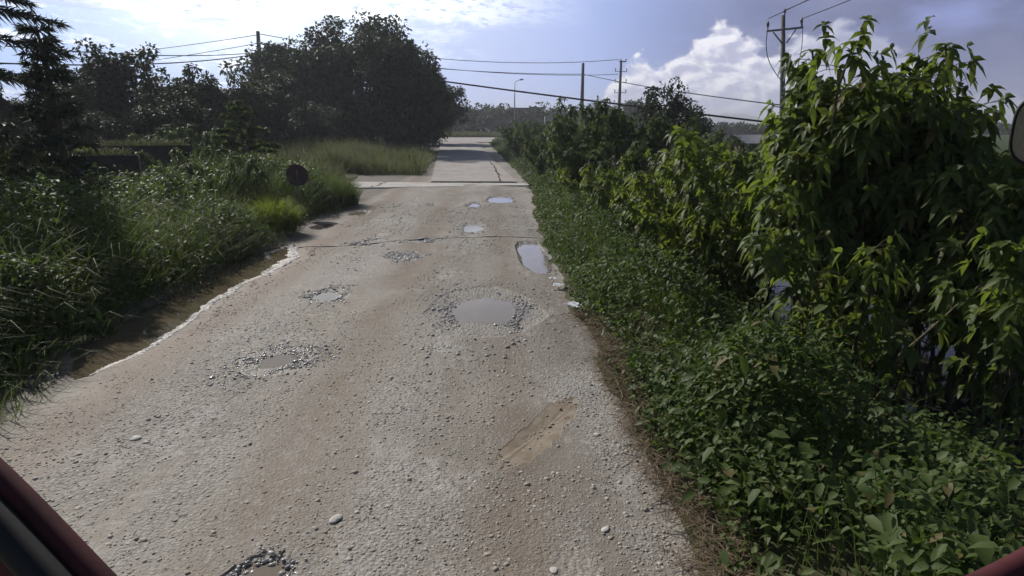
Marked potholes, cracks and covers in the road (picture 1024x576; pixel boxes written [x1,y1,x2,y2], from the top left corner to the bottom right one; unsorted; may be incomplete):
pothole [374,248,431,264]
pothole [515,241,557,274]
pothole [485,193,516,204]
pothole [220,534,323,576]
pothole [202,339,346,390]
pothole [289,284,354,309]
crack [299,236,532,248]
pothole [450,220,493,235]
